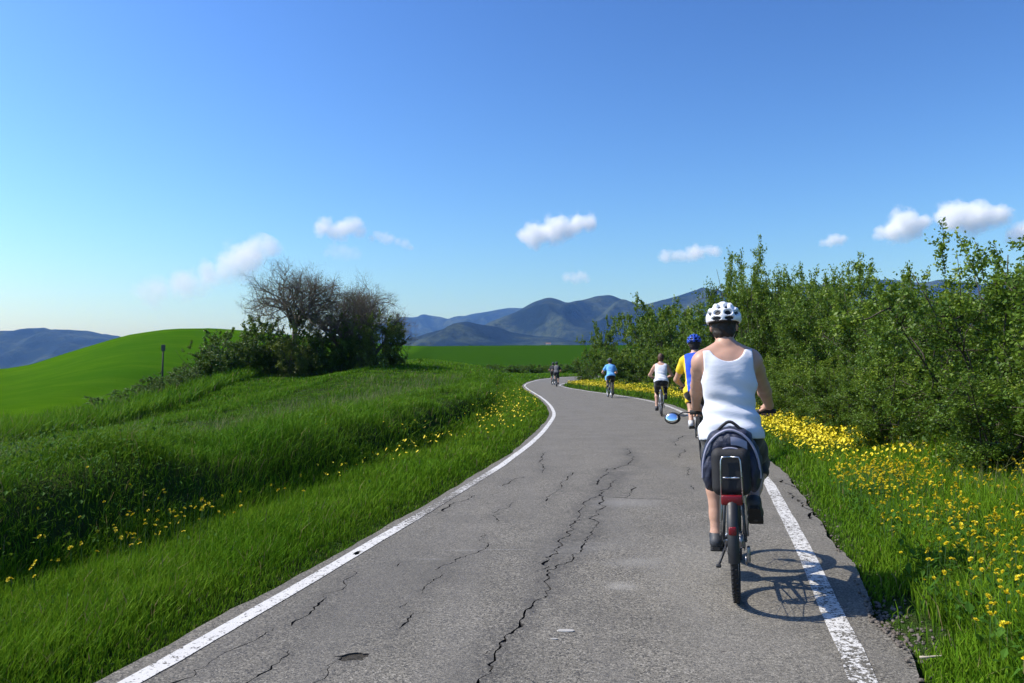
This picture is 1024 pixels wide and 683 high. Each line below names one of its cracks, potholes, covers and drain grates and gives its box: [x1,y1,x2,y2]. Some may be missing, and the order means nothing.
pothole [336,652,369,661]
crack [476,449,666,683]
crack [399,503,512,629]
